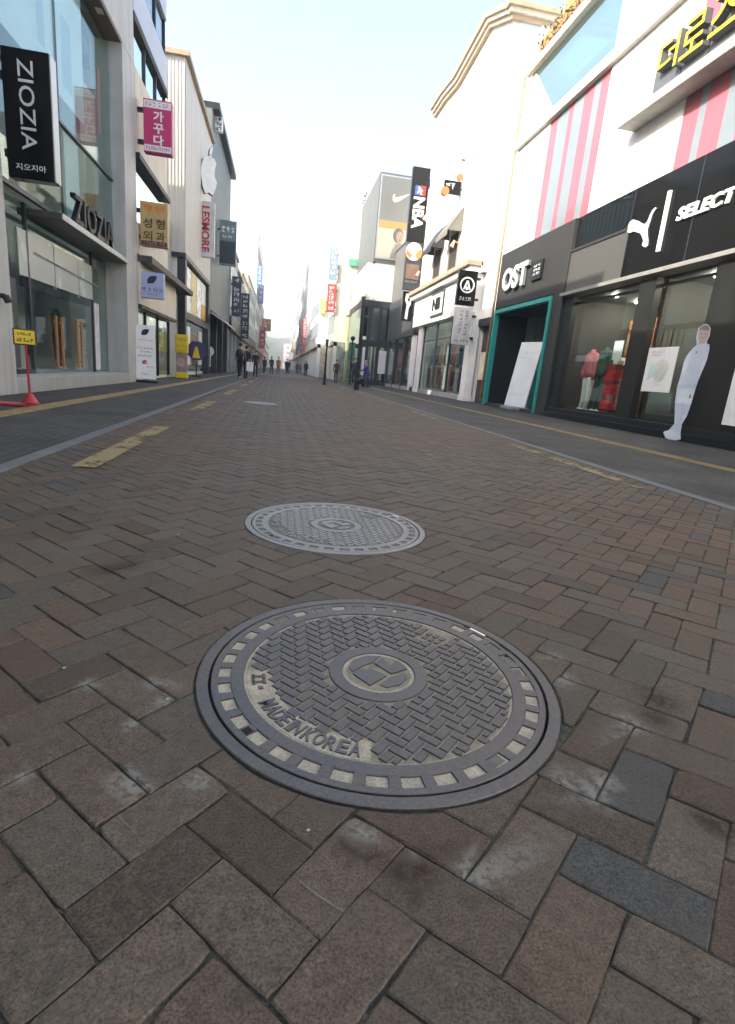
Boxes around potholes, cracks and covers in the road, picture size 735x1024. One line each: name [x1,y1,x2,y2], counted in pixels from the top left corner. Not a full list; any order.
manhole cover [195,599,561,813]
manhole cover [245,503,425,556]
